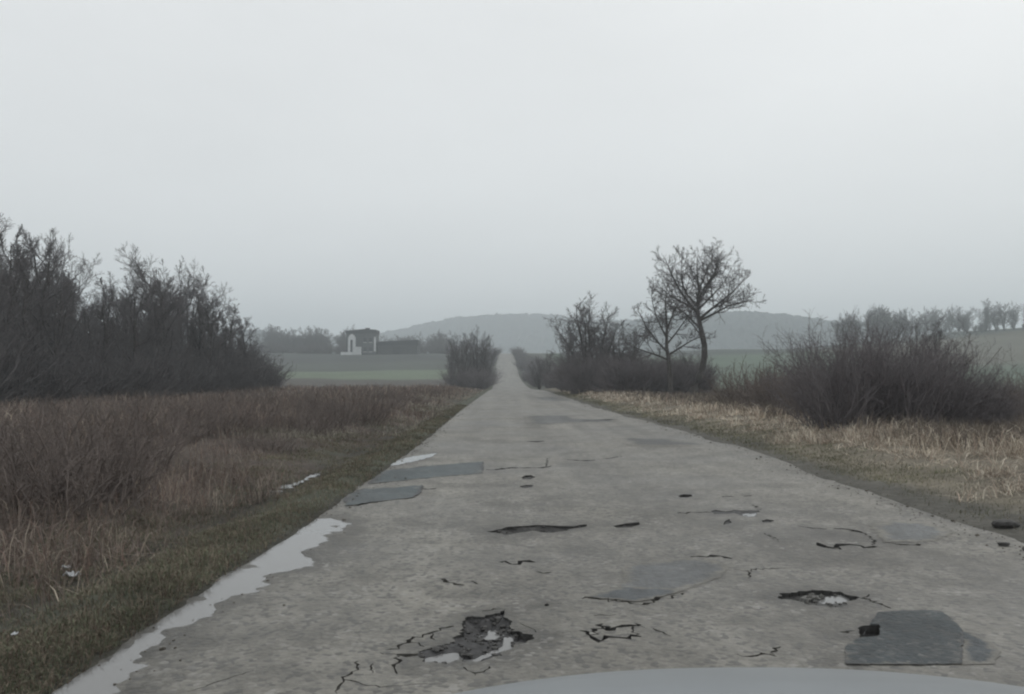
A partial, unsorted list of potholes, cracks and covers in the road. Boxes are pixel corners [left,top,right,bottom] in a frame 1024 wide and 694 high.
pothole [487,524,587,535]
crack [501,560,552,574]
crack [801,526,921,550]
pothole [778,590,860,607]
crack [335,626,454,693]
crack [579,593,684,643]
pothole [416,611,534,664]
crack [495,441,550,470]
